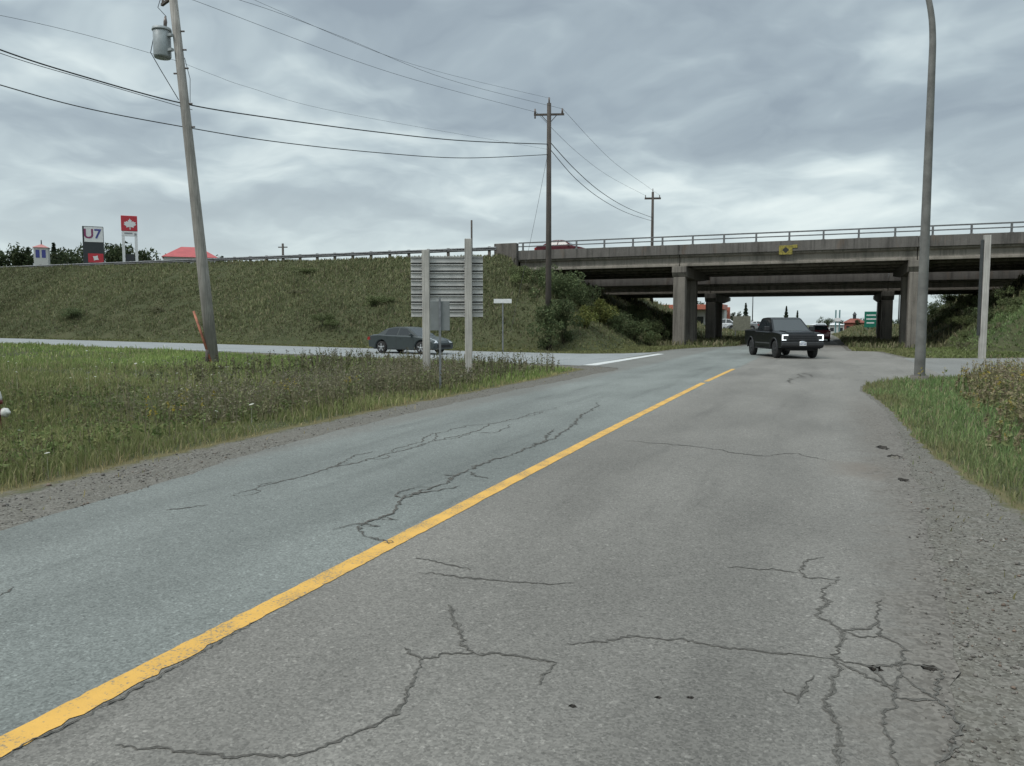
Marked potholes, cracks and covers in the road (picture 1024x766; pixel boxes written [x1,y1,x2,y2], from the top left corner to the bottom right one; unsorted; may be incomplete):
crack [232,408,555,496]
crack [335,402,600,544]
crack [628,440,825,460]
crack [115,557,965,766]
